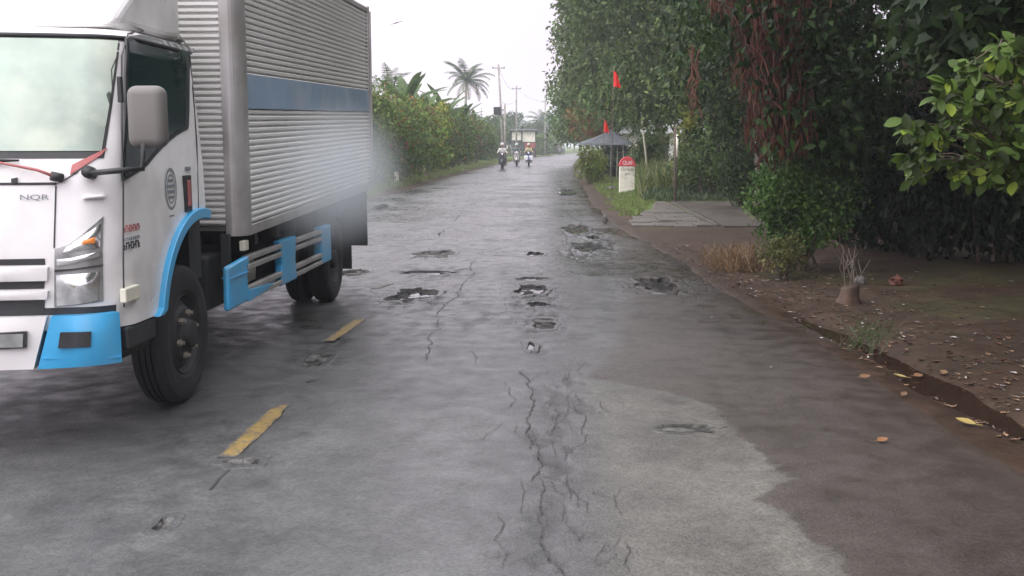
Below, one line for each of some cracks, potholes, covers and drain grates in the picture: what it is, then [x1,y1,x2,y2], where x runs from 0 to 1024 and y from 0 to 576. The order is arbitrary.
pothole [567,241,613,254]
pothole [407,249,460,260]
pothole [211,452,271,470]
pothole [630,276,685,295]
pothole [519,300,556,310]
pothole [294,351,338,370]
pothole [377,286,447,305]
pothole [644,420,728,437]
crack [474,363,651,576]
pothole [139,511,186,538]
pothole [558,224,594,235]
pothole [508,283,553,298]
